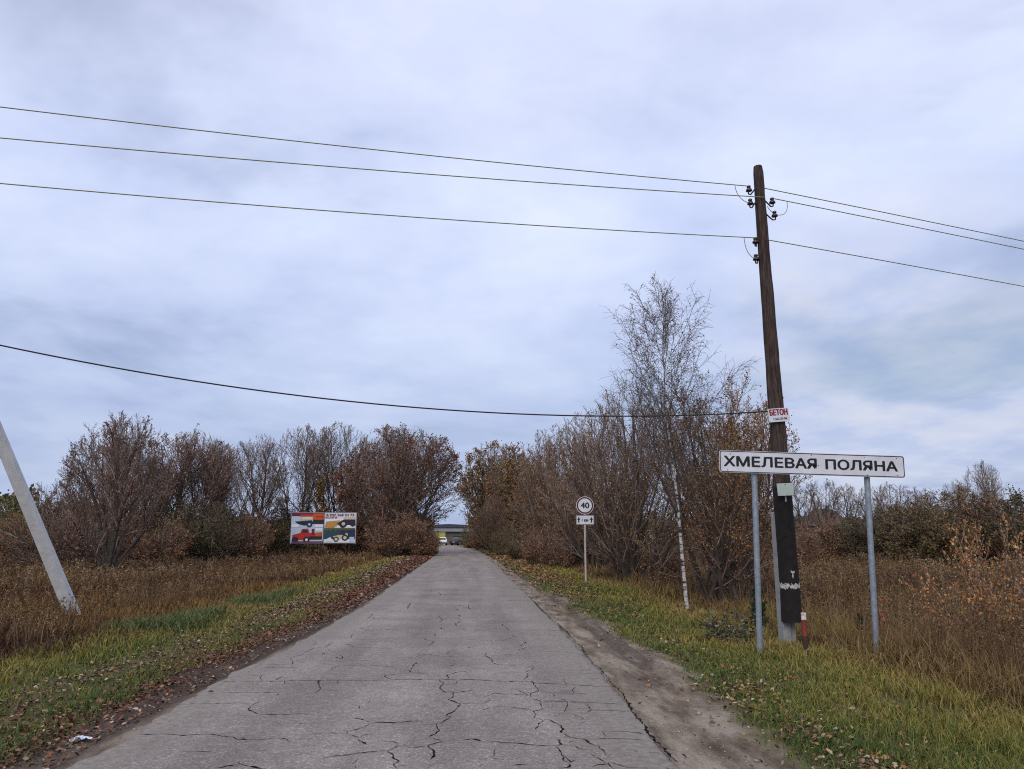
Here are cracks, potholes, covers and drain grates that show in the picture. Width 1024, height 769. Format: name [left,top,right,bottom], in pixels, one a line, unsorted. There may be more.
crack [191,577,678,768]
